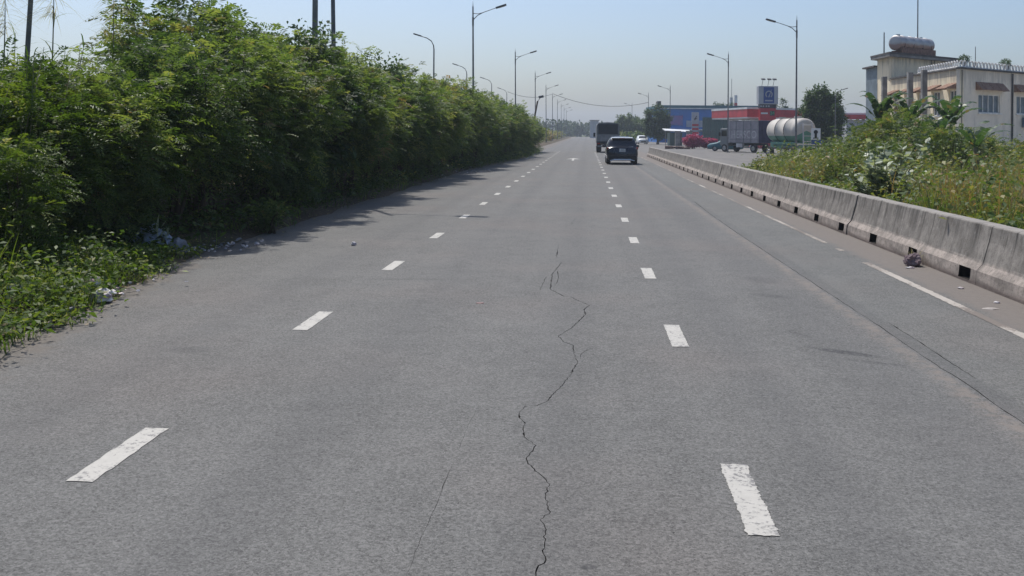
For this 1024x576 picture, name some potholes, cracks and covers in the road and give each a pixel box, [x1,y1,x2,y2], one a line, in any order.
crack [406,403,480,575]
crack [518,250,589,576]
